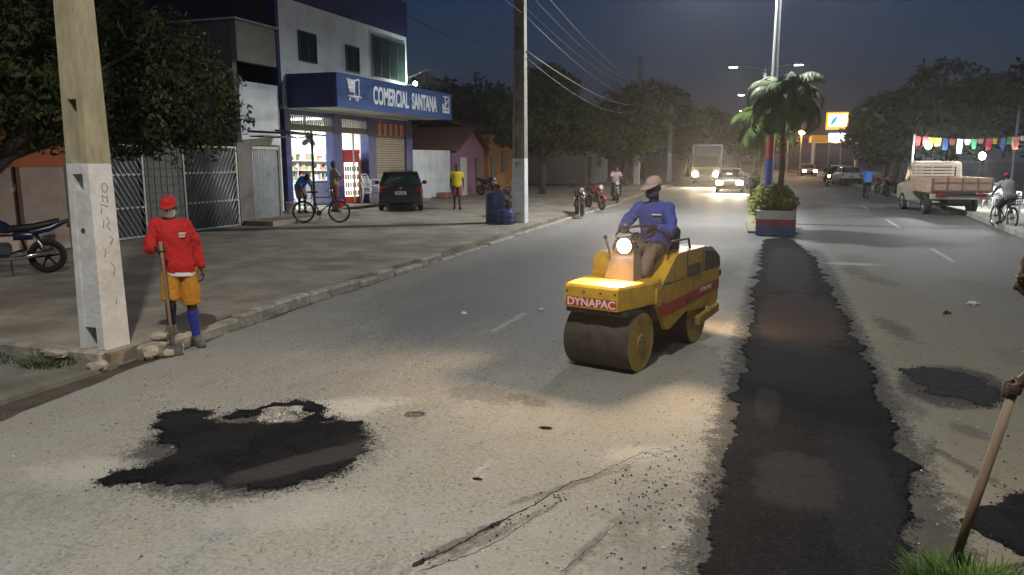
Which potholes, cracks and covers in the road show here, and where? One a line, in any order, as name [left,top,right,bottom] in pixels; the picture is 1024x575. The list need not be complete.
crack [412,448,655,571]
pothole [257,410,310,422]
